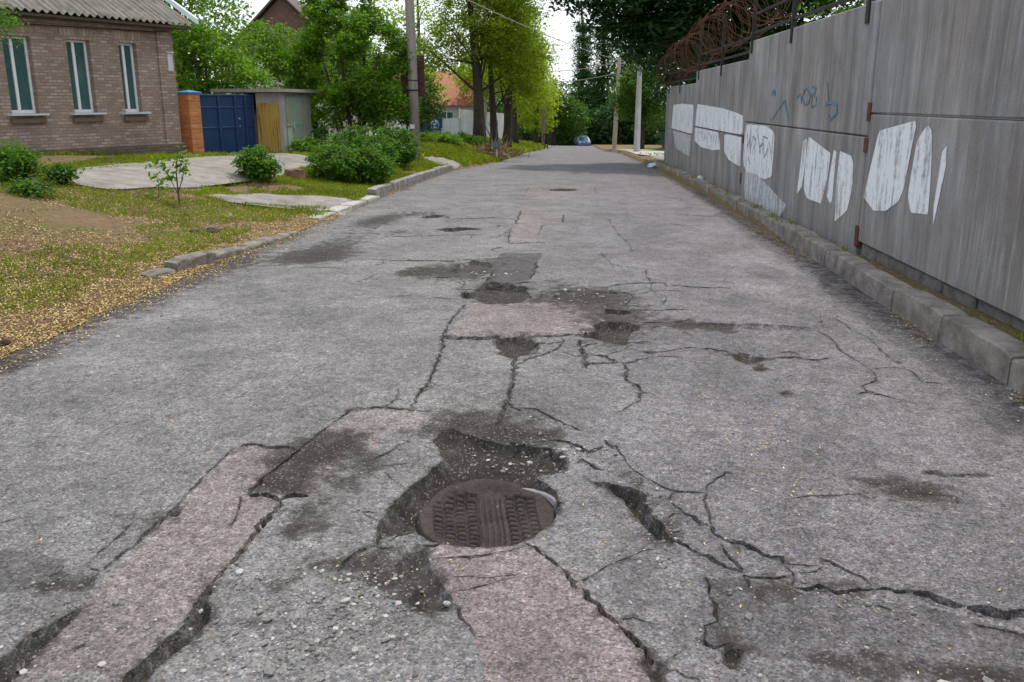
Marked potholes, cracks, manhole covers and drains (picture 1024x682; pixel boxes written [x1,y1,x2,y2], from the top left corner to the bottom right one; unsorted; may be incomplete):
manhole cover [415,479,559,548]
pothole [581,320,640,346]
pothole [394,551,453,613]
crack [38,388,526,641]
pothole [460,282,532,304]
pothole [495,337,537,361]
pothole [377,428,570,536]
crack [441,220,1024,649]
